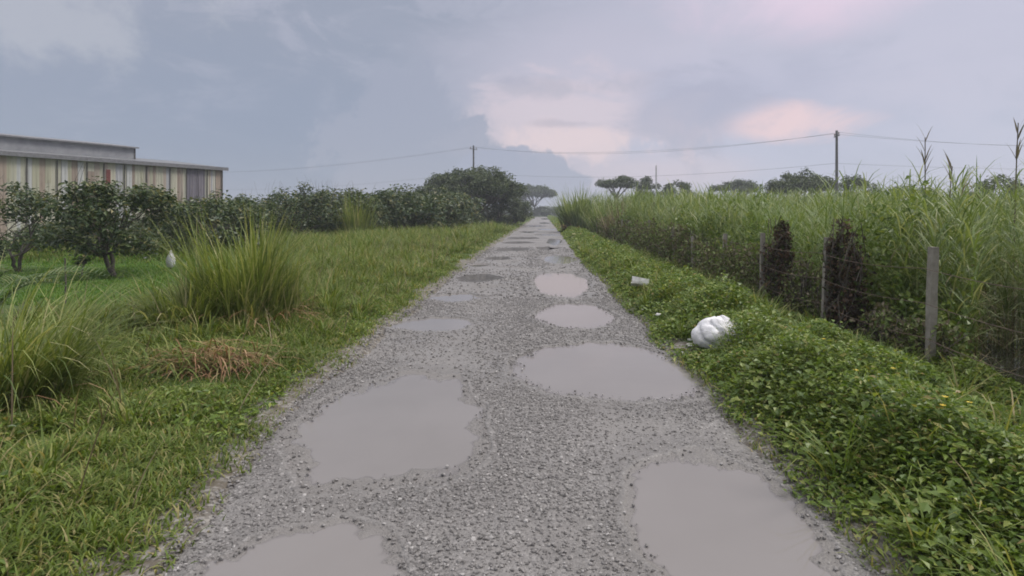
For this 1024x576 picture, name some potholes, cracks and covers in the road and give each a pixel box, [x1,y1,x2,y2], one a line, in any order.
pothole [425,292,494,303]
pothole [524,301,626,331]
pothole [386,315,485,333]
pothole [179,512,427,576]
pothole [501,339,711,405]
pothole [270,369,498,501]
pothole [615,443,856,576]
pothole [451,273,510,283]
pothole [527,270,598,301]
